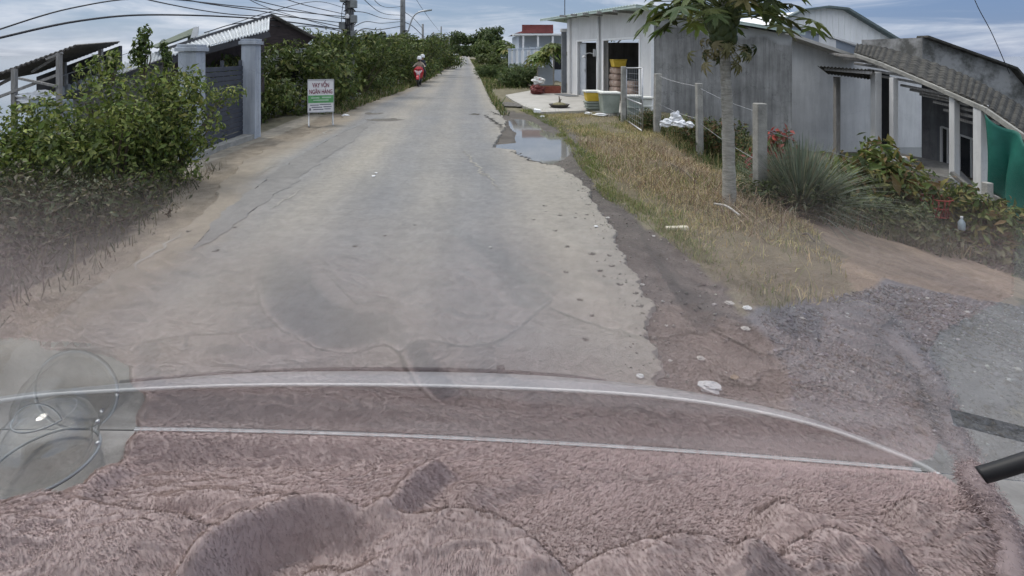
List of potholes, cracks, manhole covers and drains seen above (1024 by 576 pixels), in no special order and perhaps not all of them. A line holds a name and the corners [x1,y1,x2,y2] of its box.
crack [464,151,500,189]
